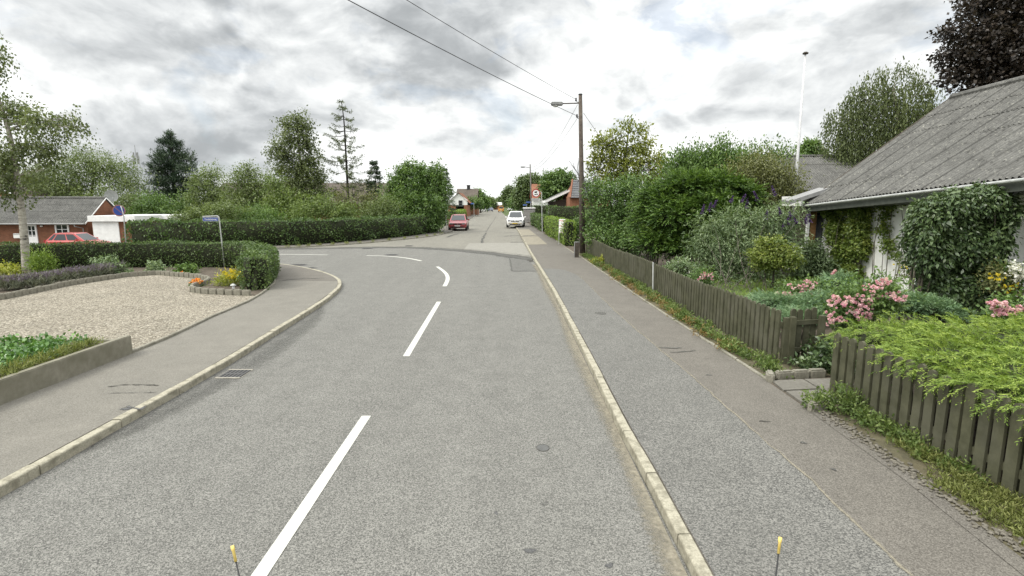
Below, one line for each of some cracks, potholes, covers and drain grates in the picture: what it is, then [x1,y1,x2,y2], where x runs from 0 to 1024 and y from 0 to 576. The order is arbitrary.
drain grate [215,369,253,379]
